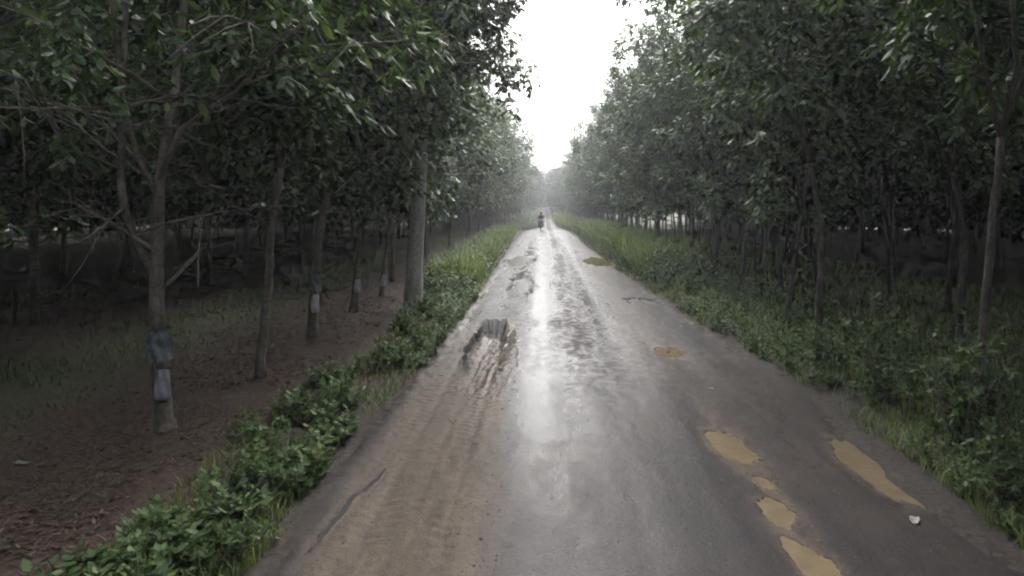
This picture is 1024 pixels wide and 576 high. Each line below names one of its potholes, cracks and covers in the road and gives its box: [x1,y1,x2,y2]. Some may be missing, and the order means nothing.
crack [307,468,388,552]
pothole [510,277,533,299]
pothole [505,254,536,269]
pothole [452,315,522,407]
